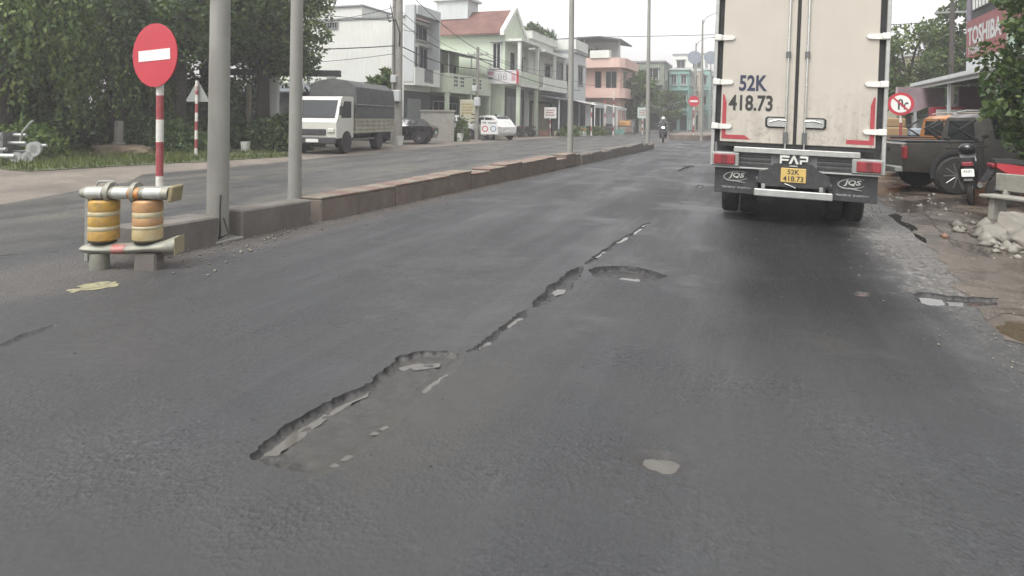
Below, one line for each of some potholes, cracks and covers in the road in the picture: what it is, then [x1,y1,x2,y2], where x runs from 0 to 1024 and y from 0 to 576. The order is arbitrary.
pothole [250,350,464,476]
pothole [531,265,584,308]
pothole [913,292,998,307]
pothole [588,266,668,282]
